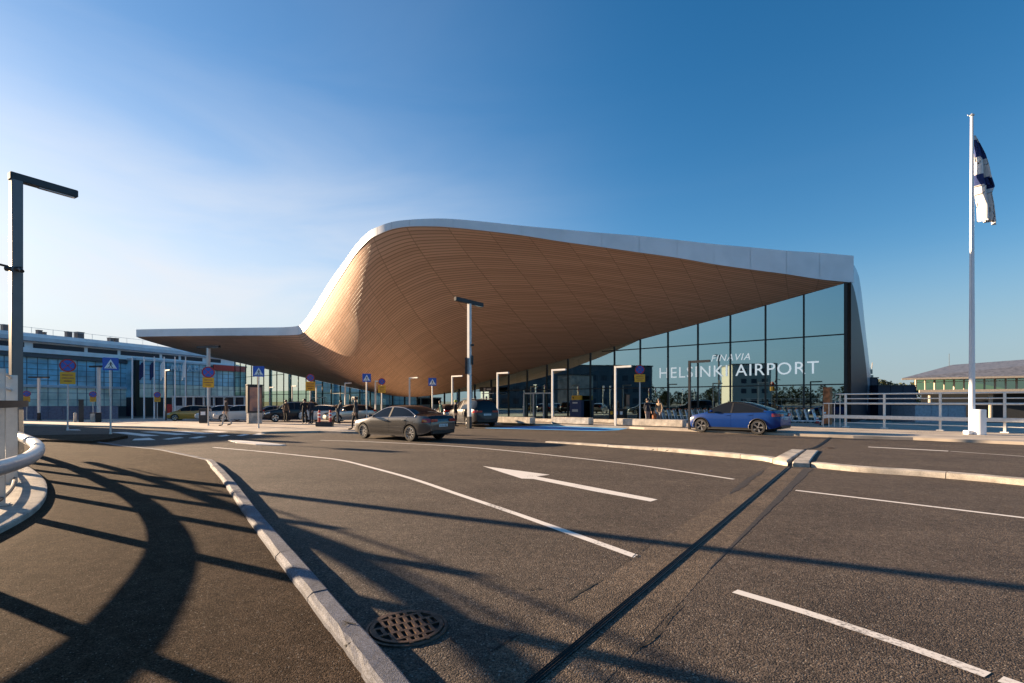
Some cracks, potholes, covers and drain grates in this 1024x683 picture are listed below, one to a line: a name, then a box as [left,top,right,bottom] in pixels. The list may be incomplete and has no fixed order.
crack [548,542,652,615]
